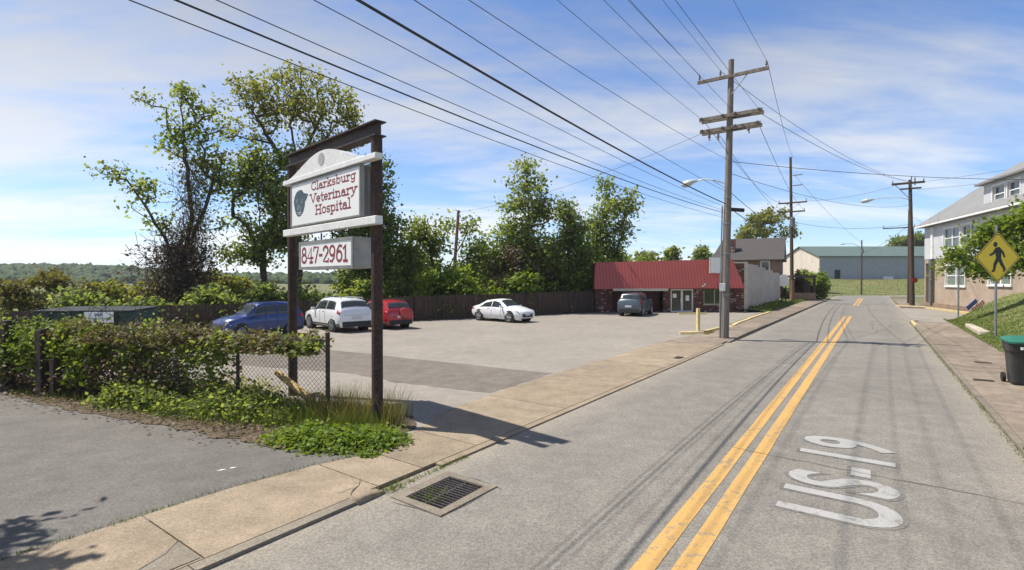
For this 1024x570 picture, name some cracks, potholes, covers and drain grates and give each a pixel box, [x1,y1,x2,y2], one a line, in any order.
drain grate [390,471,497,517]
